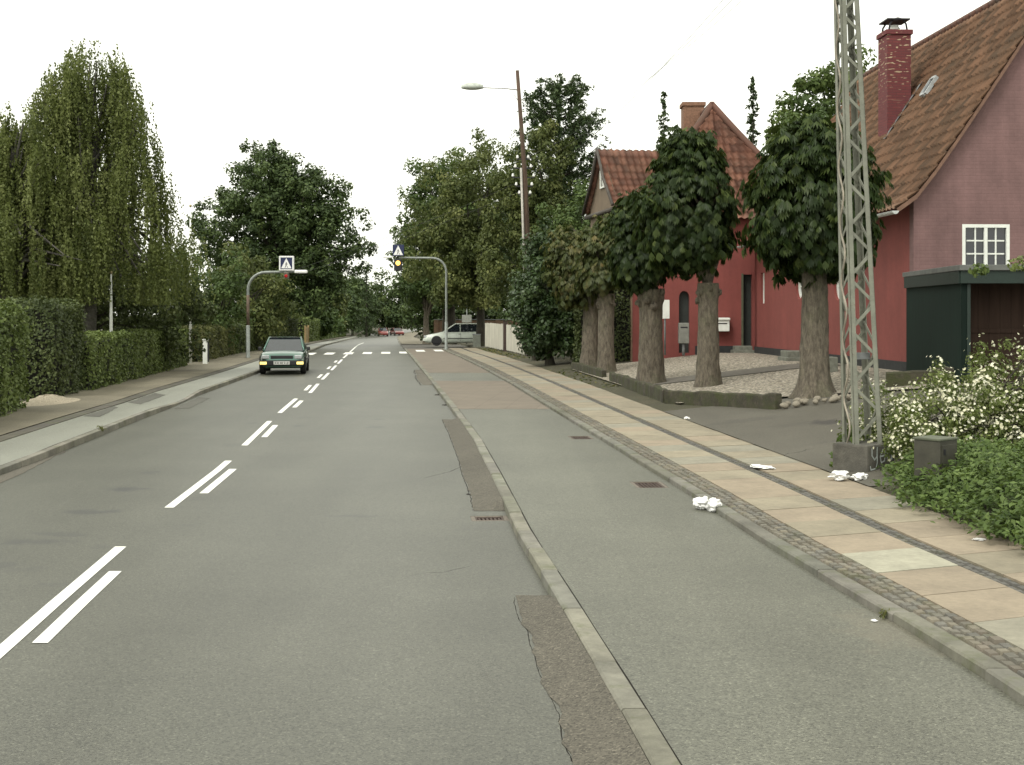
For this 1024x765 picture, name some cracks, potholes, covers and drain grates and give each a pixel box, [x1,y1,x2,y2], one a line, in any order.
crack [426,420,473,508]
